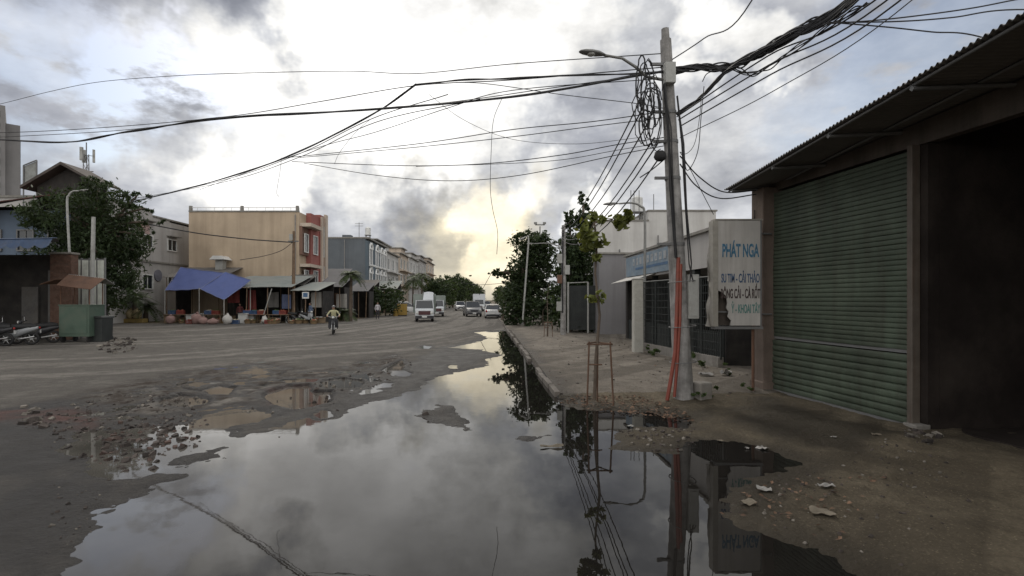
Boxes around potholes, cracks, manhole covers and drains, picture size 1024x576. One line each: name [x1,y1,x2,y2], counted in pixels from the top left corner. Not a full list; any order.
pothole [370,381,396,389]
pothole [380,359,415,377]
pothole [155,392,214,407]
pothole [198,383,238,395]
pothole [259,383,338,409]
